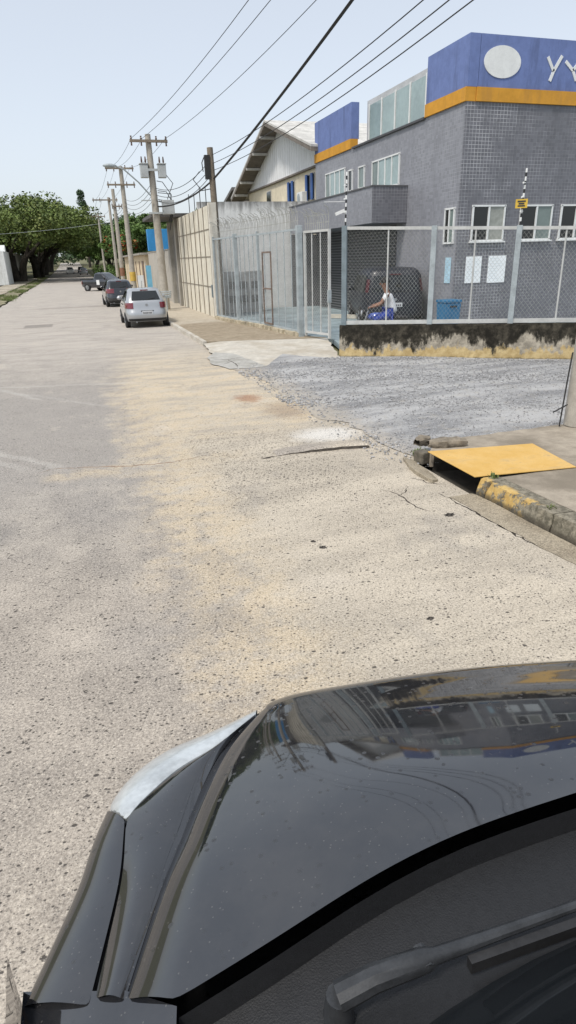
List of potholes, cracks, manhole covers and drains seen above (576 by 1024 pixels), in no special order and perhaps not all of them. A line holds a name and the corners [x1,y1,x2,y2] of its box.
crack [41,455,206,473]
crack [381,478,537,546]
